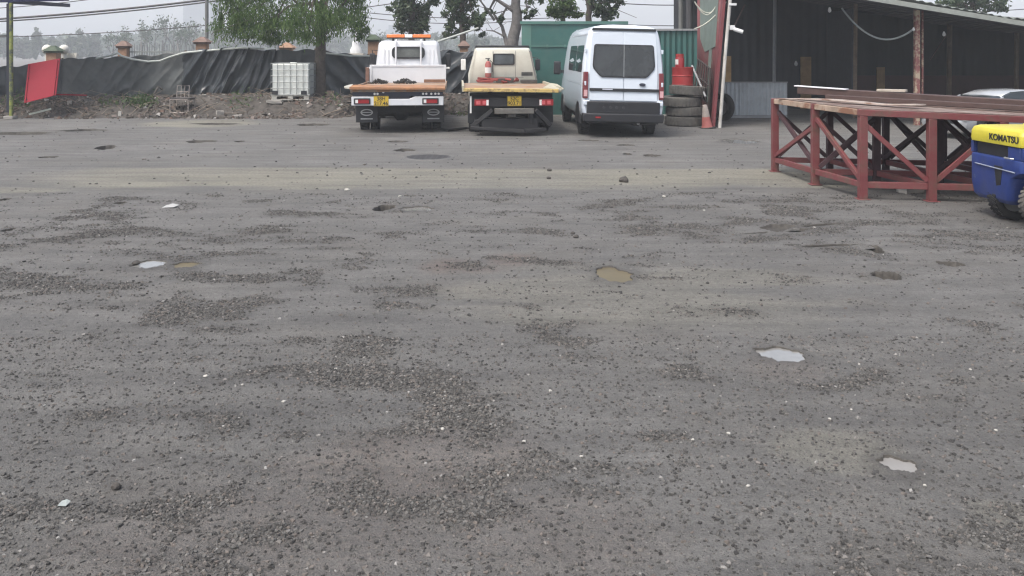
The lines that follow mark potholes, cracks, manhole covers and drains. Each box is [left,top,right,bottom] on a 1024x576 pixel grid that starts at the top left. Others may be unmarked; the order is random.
pothole [850,244,892,256]
pothole [864,451,931,479]
pothole [928,260,974,269]
pothole [162,260,210,270]
pothole [367,204,403,213]
pothole [744,344,815,366]
pothole [753,223,815,234]
pothole [588,265,641,285]
pothole [860,270,910,283]
pothole [122,259,175,271]
